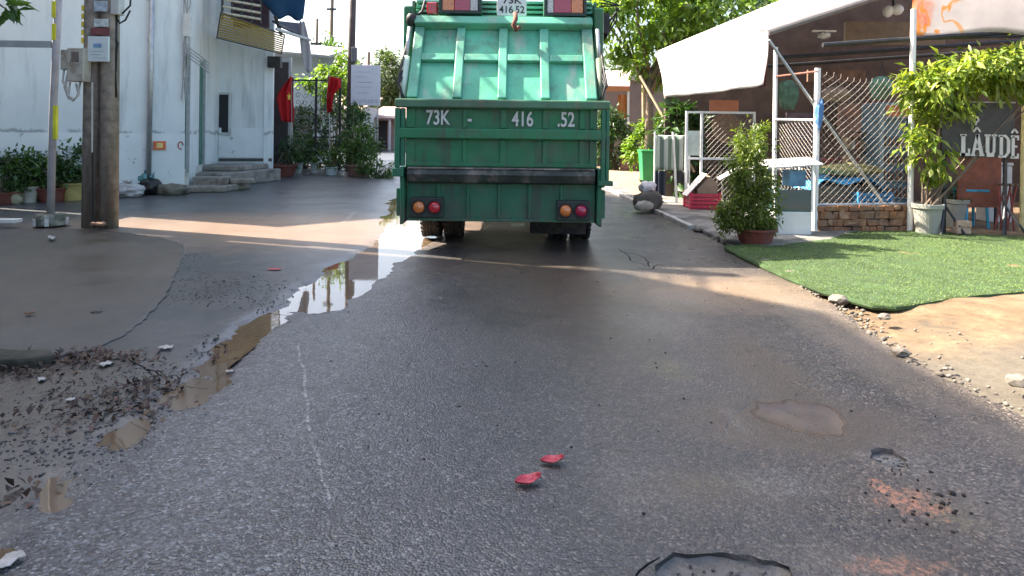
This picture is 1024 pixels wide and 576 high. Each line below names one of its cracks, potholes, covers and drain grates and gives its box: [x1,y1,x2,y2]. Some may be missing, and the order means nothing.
crack [619,249,657,269]
pothole [655,552,793,576]
pothole [870,447,910,469]
